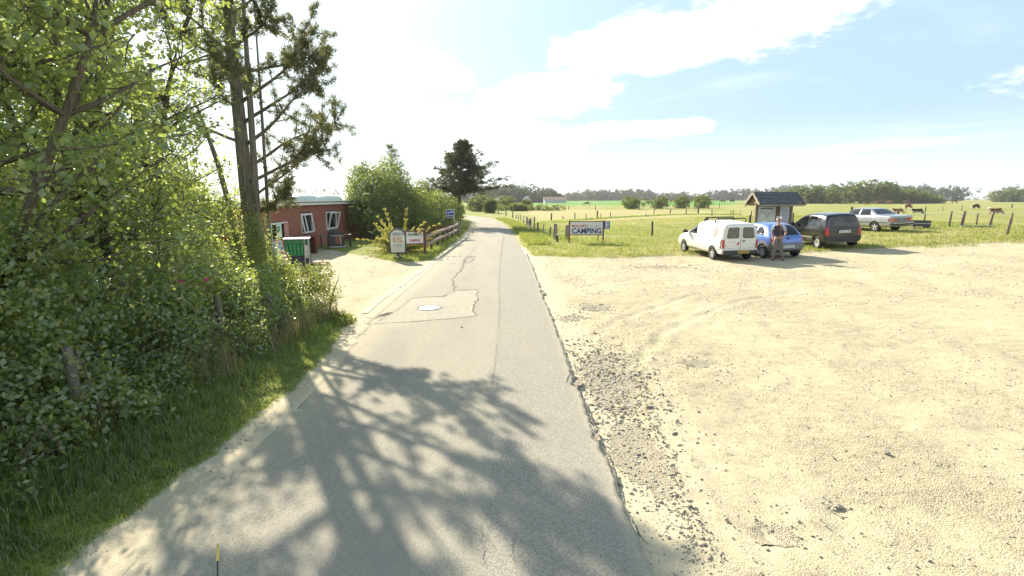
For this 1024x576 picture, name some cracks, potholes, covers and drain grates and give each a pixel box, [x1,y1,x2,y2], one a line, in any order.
crack [367,249,485,324]
